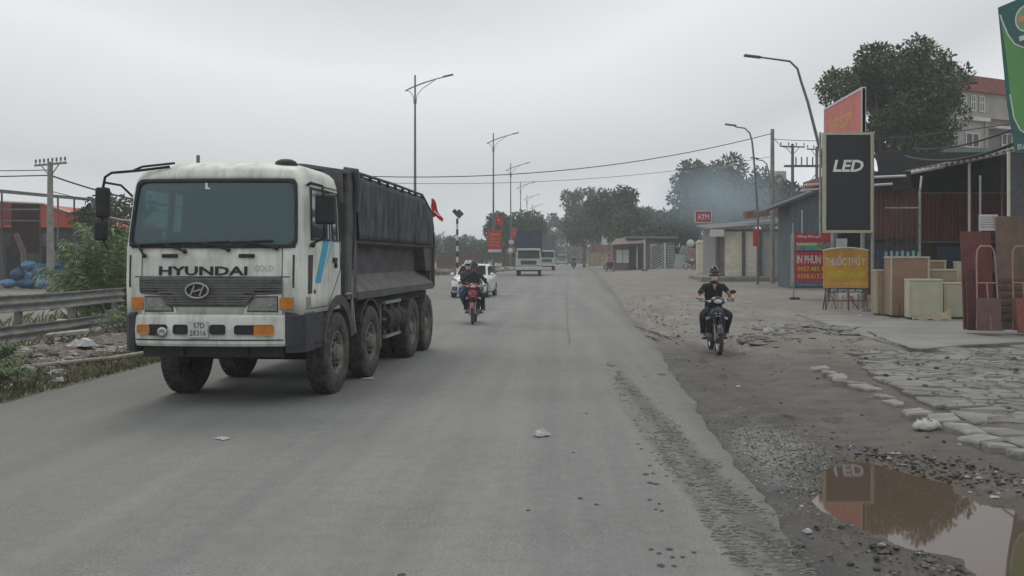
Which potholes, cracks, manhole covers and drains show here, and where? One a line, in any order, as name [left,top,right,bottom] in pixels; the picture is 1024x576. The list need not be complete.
pothole [796,454,1024,576]
